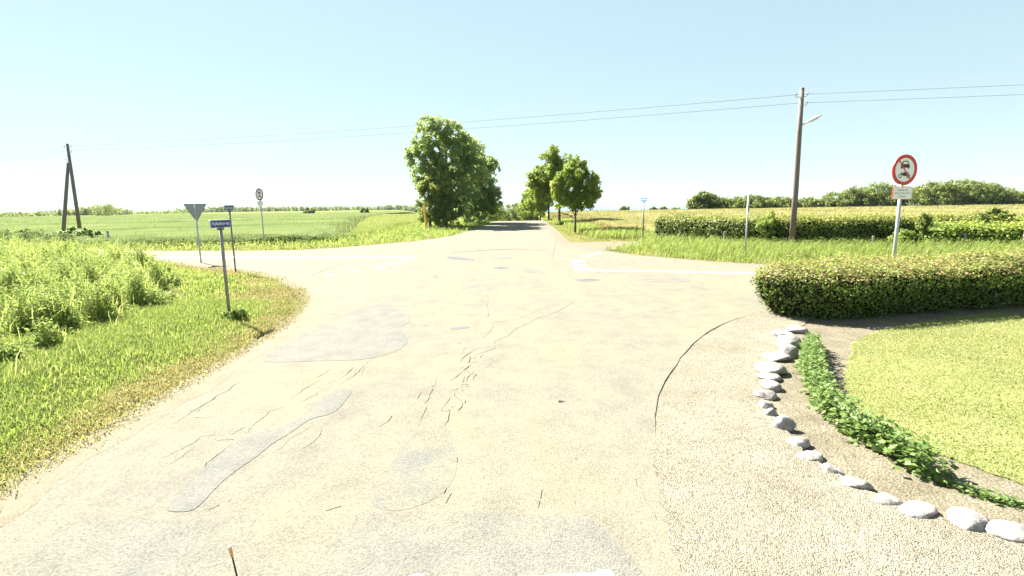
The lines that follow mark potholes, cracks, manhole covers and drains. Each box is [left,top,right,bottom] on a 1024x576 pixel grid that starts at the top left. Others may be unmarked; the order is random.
crack [162,349,402,467]
crack [418,300,570,426]
